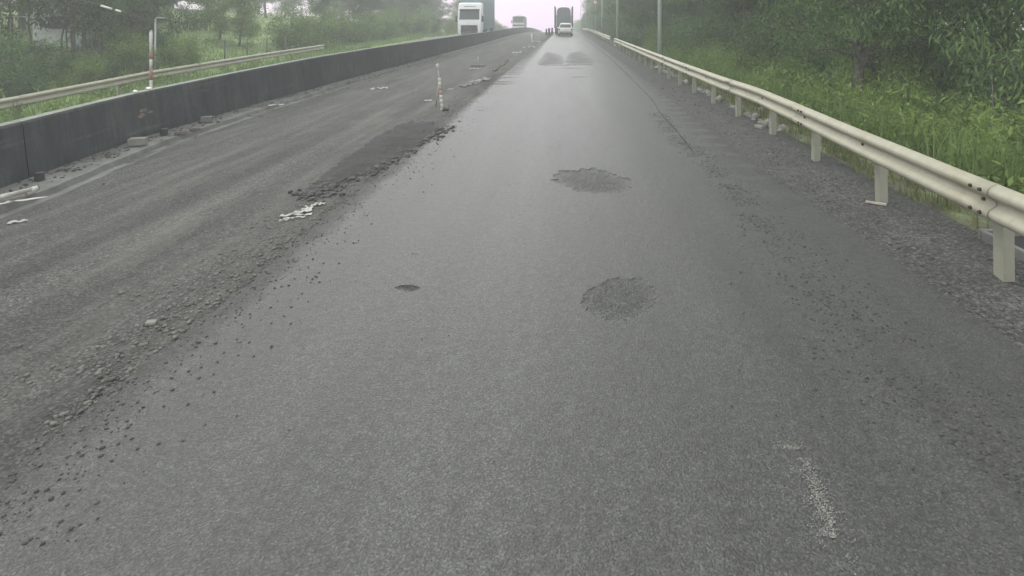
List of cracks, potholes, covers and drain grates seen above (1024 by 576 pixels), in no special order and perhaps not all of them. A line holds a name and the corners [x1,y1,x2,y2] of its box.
crack [592,44,692,150]
